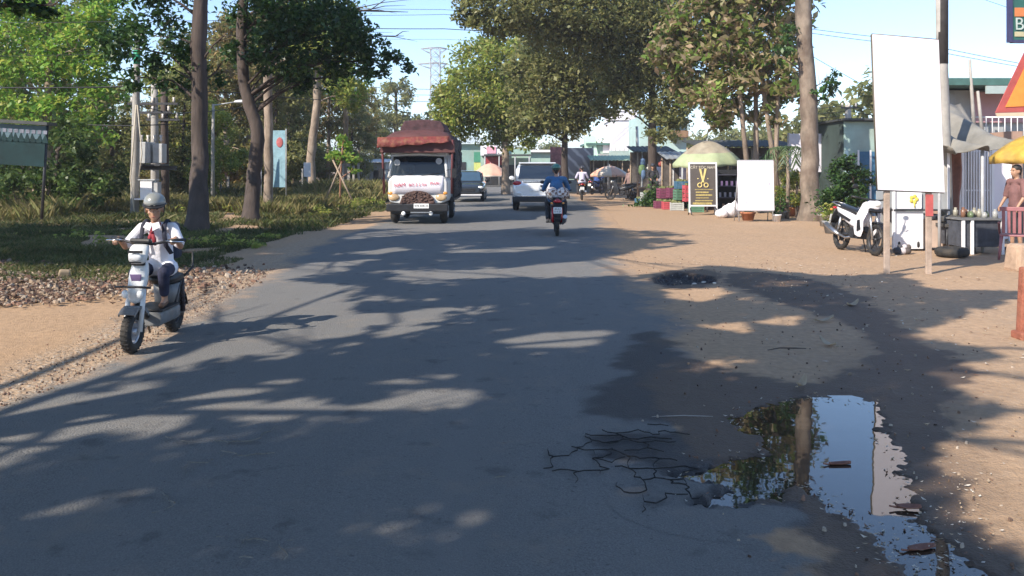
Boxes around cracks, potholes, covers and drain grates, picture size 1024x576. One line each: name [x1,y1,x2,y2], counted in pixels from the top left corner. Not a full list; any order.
pothole [628,269,744,290]
pothole [590,380,1024,576]
crack [543,424,703,512]
